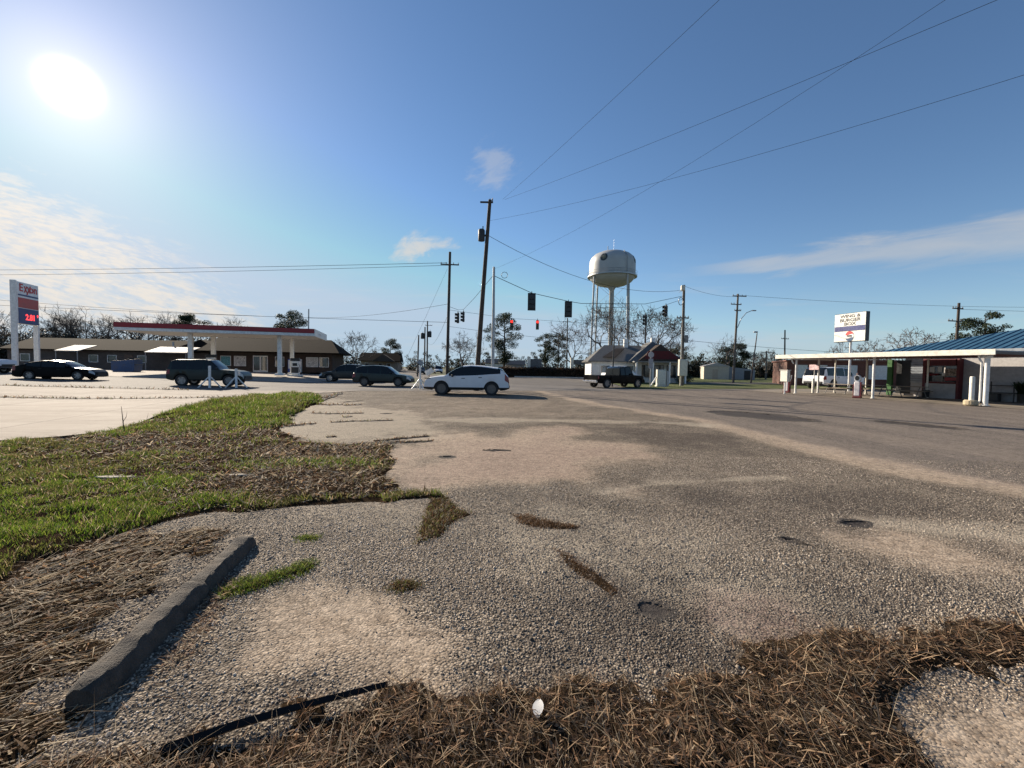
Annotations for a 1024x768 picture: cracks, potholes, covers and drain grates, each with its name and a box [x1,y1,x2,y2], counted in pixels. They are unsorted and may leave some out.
crack [279,400,433,460]
pothole [775,535,800,545]
pothole [835,518,874,528]
pothole [630,598,679,624]
